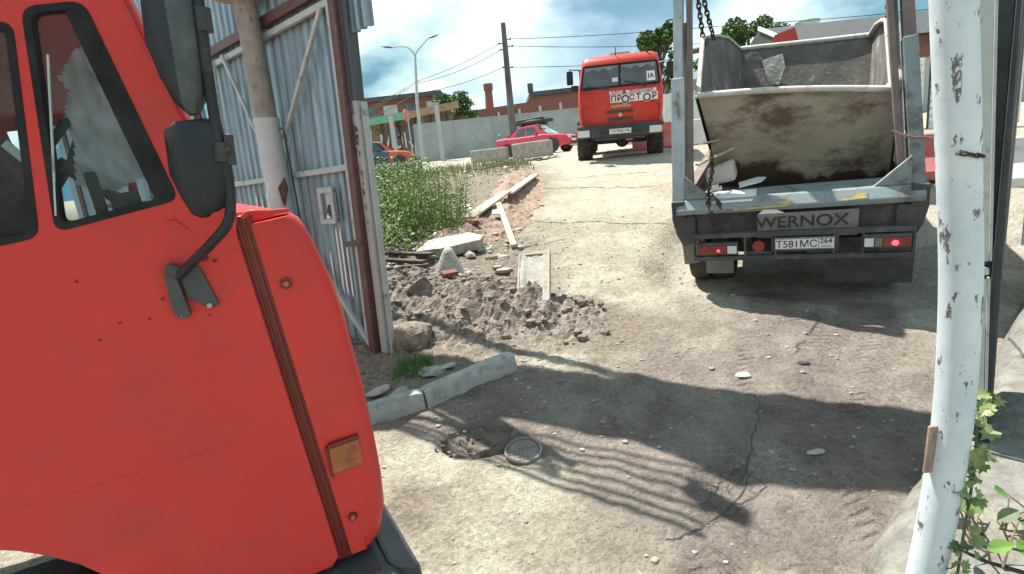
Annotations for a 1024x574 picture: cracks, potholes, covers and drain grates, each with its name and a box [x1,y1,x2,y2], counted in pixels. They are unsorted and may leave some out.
crack [667,402,766,542]
manhole cover [504,437,542,465]
pothole [434,427,518,461]
